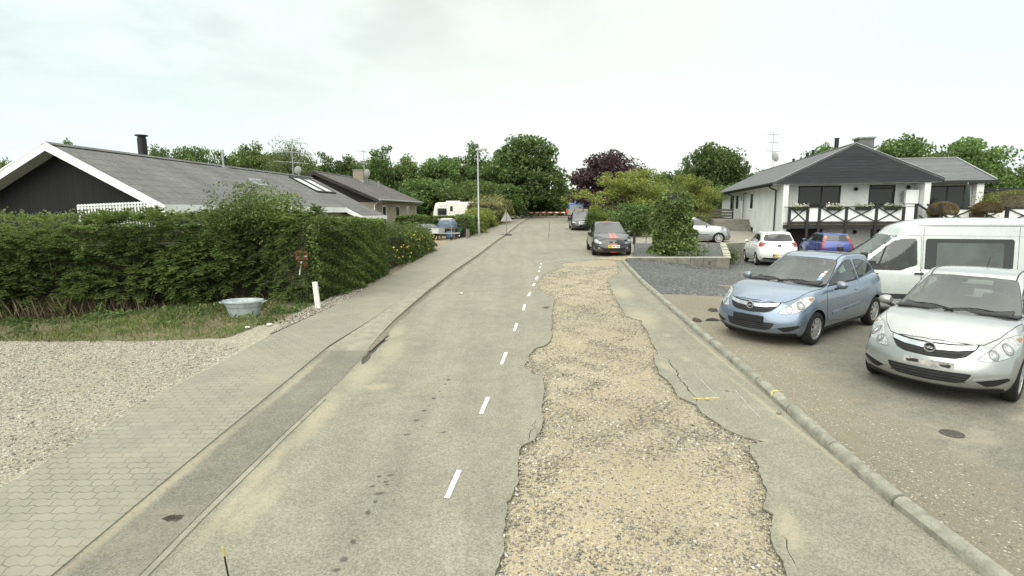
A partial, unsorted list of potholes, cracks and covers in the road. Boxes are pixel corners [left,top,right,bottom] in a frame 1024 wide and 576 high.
pothole [495,260,787,576]
pothole [162,514,184,522]
manhole cover [939,429,965,438]
